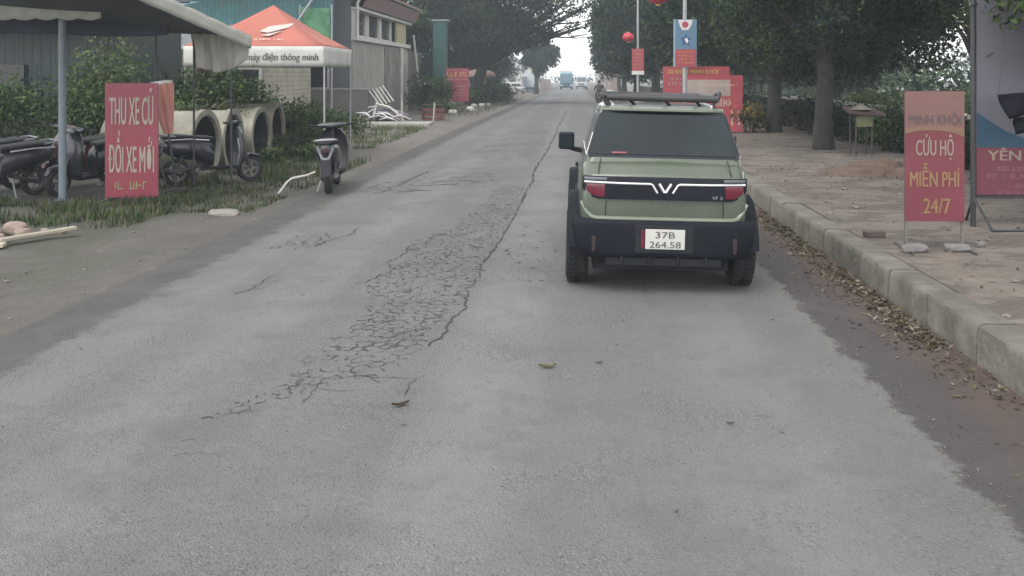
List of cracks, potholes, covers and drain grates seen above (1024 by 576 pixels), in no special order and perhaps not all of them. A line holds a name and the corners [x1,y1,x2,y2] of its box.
crack [202,110,566,420]
